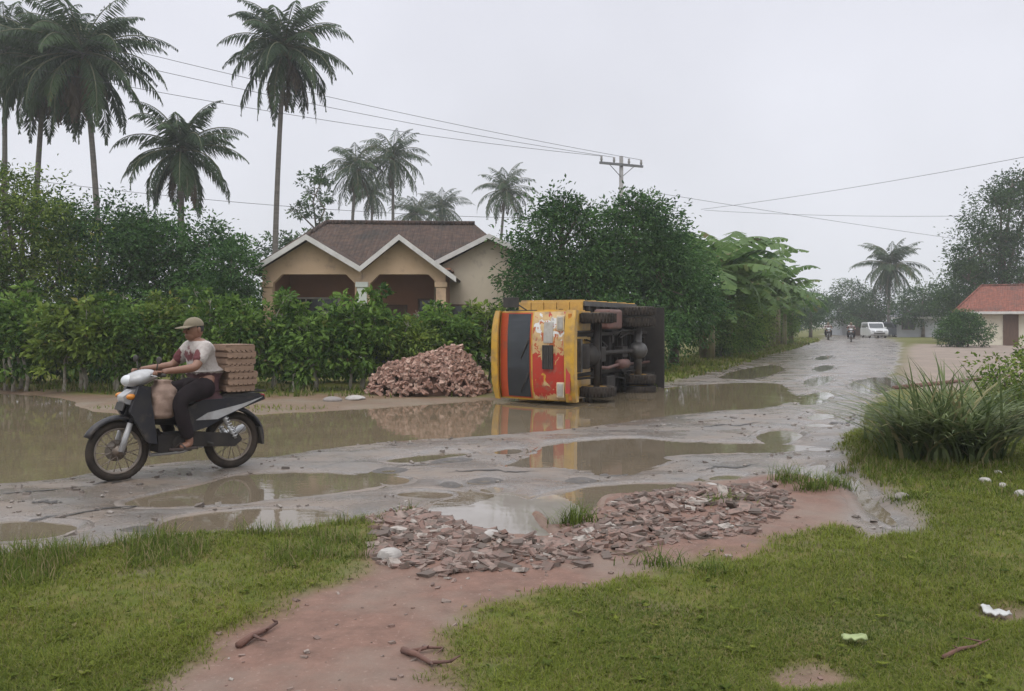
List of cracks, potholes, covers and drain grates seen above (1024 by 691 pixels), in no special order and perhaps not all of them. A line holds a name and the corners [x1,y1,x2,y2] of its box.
pothole [146,506,347,535]
pothole [386,486,496,508]
pothole [747,427,812,445]
pothole [419,488,580,538]
pothole [808,364,839,372]
crack [2,479,133,522]
pothole [377,449,481,464]
pothole [715,364,788,379]
pothole [0,515,95,544]
pothole [496,436,831,476]
pothole [845,375,910,394]
pothole [113,470,409,518]
